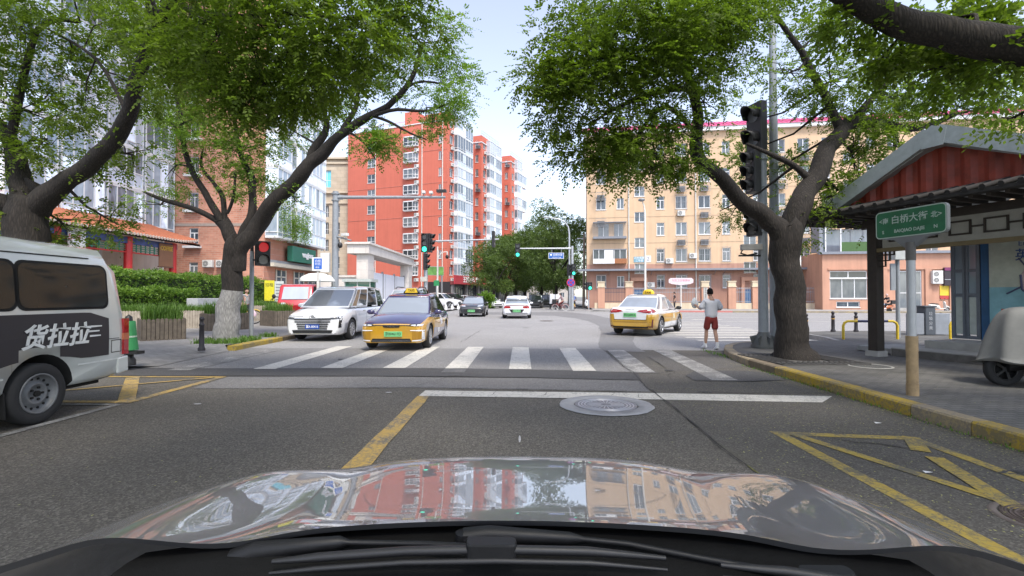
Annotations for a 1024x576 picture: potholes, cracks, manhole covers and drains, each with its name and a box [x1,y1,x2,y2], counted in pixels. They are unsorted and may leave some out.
manhole cover [559,395,655,416]
manhole cover [986,501,1024,527]
